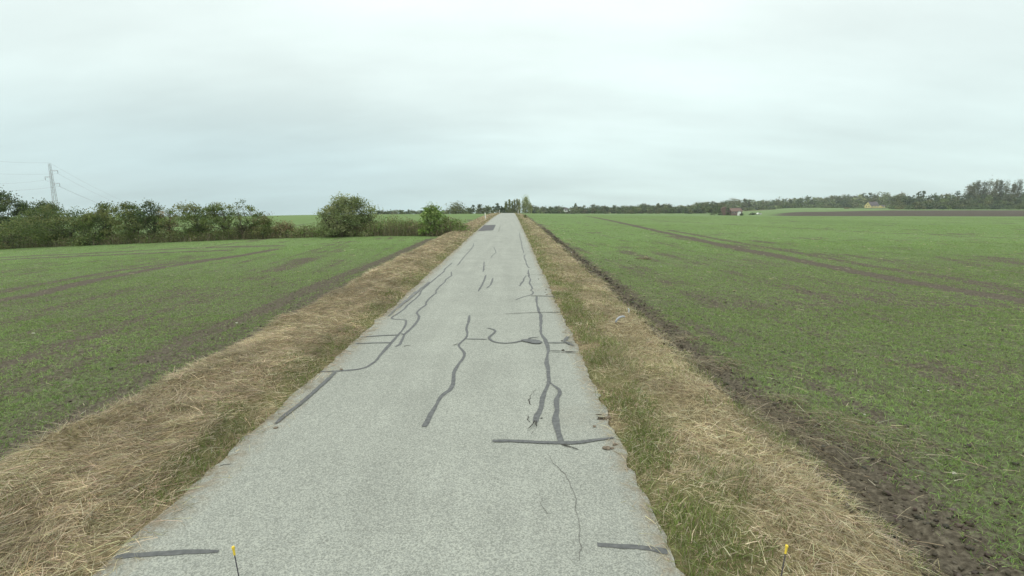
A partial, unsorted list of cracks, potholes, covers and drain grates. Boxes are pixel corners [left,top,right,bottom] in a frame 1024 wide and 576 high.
crack [538,453,668,560]
